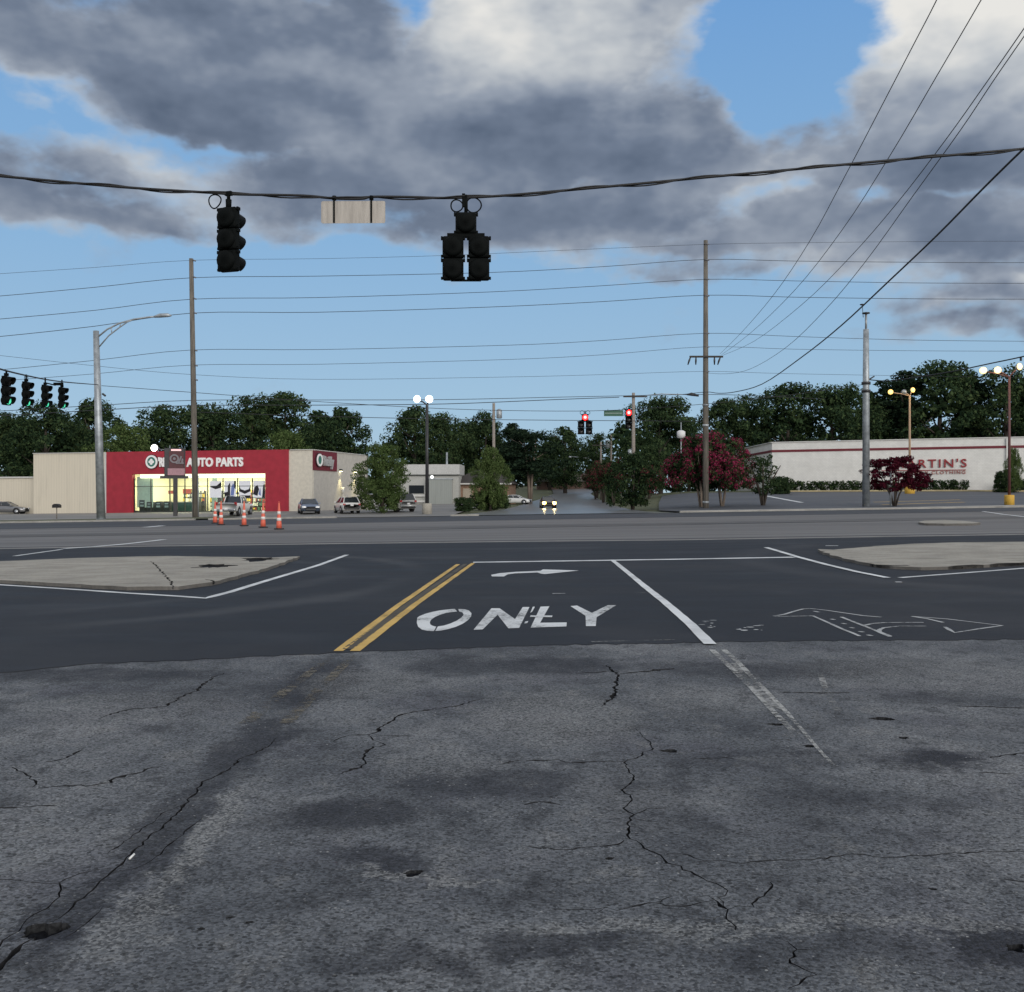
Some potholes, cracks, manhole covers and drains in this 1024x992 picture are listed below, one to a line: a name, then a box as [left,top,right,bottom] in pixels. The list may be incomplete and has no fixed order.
crack [334,698,484,776]
pothole [20,922,71,940]
crack [503,729,1024,930]
crack [777,937,817,988]
crack [585,665,675,706]
crack [12,750,155,788]
